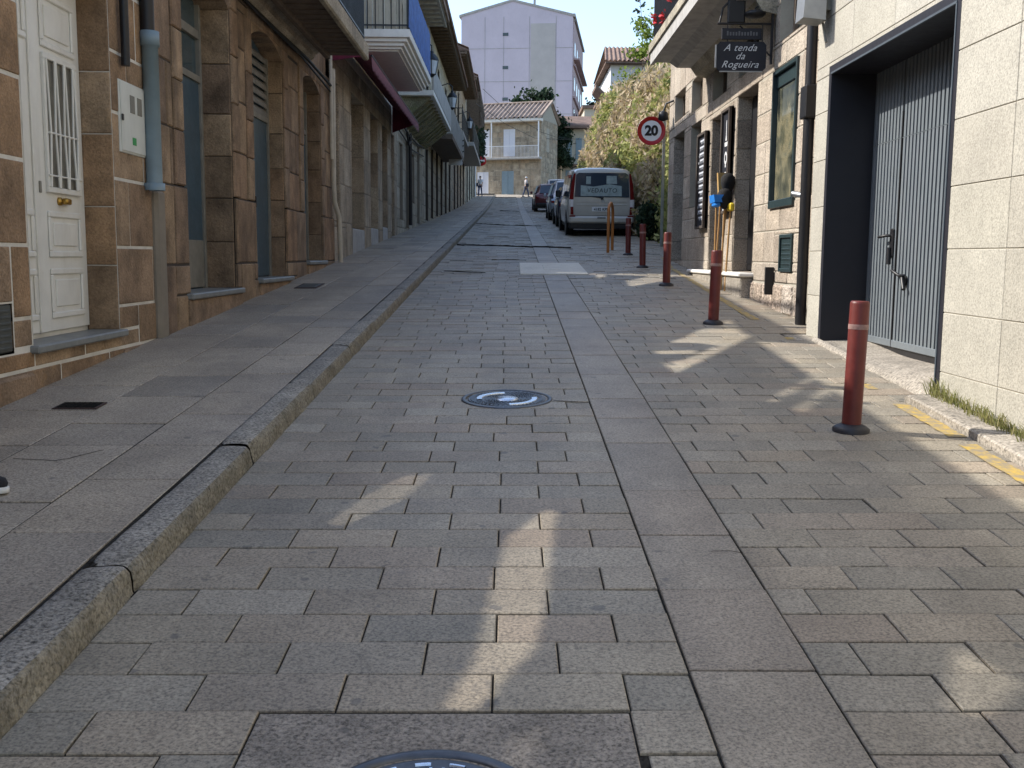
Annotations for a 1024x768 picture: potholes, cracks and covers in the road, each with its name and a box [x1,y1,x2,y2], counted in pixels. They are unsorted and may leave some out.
manhole cover [461,389,552,409]
manhole cover [351,749,514,768]
